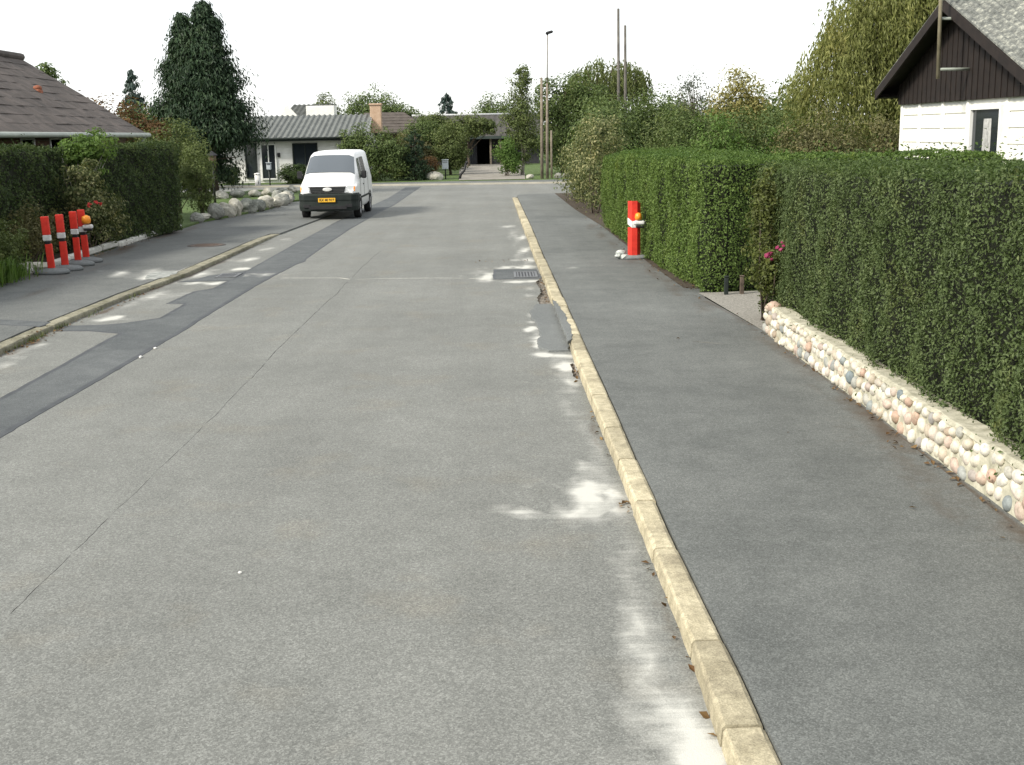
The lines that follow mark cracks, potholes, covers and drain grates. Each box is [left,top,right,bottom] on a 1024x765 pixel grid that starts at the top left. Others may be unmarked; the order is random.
pothole [536,280,551,304]
